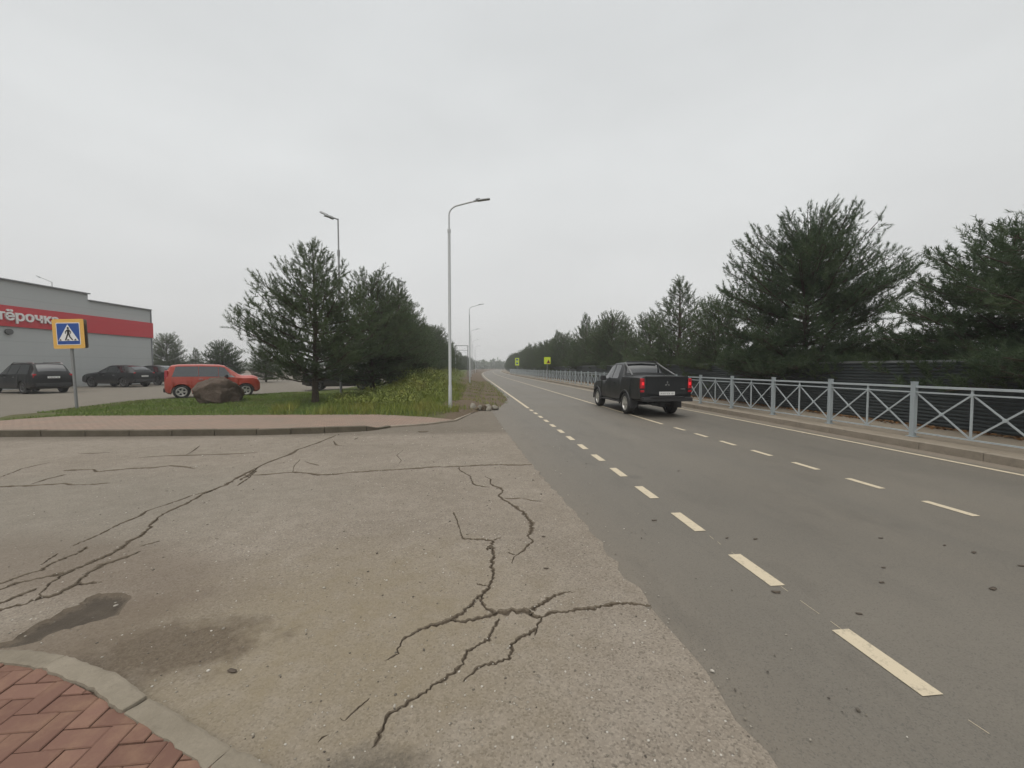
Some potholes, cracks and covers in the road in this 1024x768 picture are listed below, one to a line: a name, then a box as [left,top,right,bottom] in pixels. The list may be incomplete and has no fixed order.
crack [0,435,652,748]
